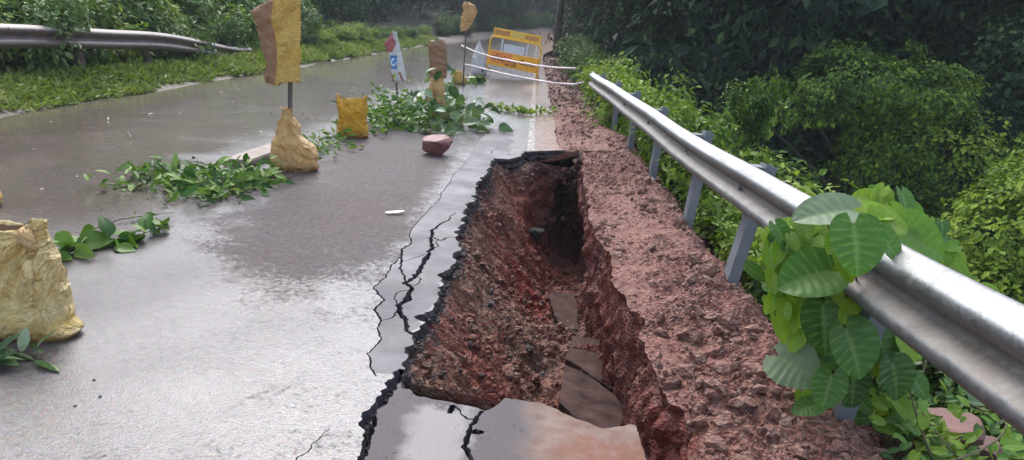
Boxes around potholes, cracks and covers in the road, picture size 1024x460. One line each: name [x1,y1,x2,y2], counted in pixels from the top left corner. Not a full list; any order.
pothole [400,150,700,460]
crack [447,405,481,460]
crack [357,162,467,460]
